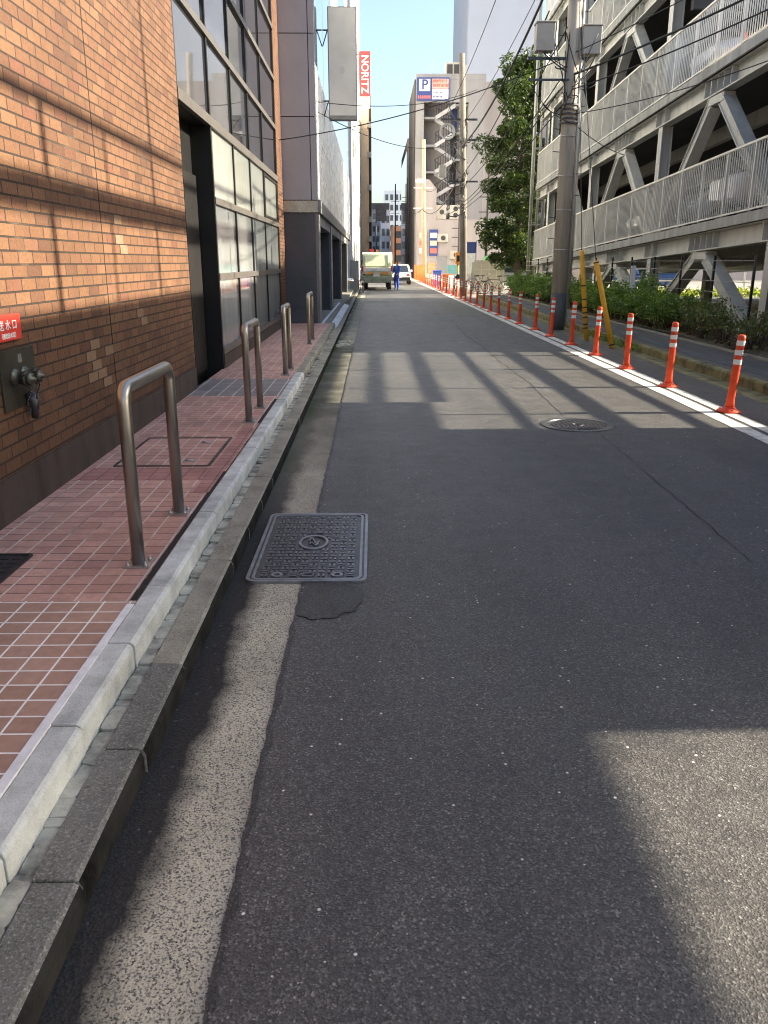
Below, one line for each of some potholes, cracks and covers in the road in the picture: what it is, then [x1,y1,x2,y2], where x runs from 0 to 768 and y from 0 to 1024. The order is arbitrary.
crack [456,325,562,415]
manhole cover [246,513,368,584]
crack [602,435,752,563]
manhole cover [541,418,615,432]
manhole cover [113,437,232,467]
